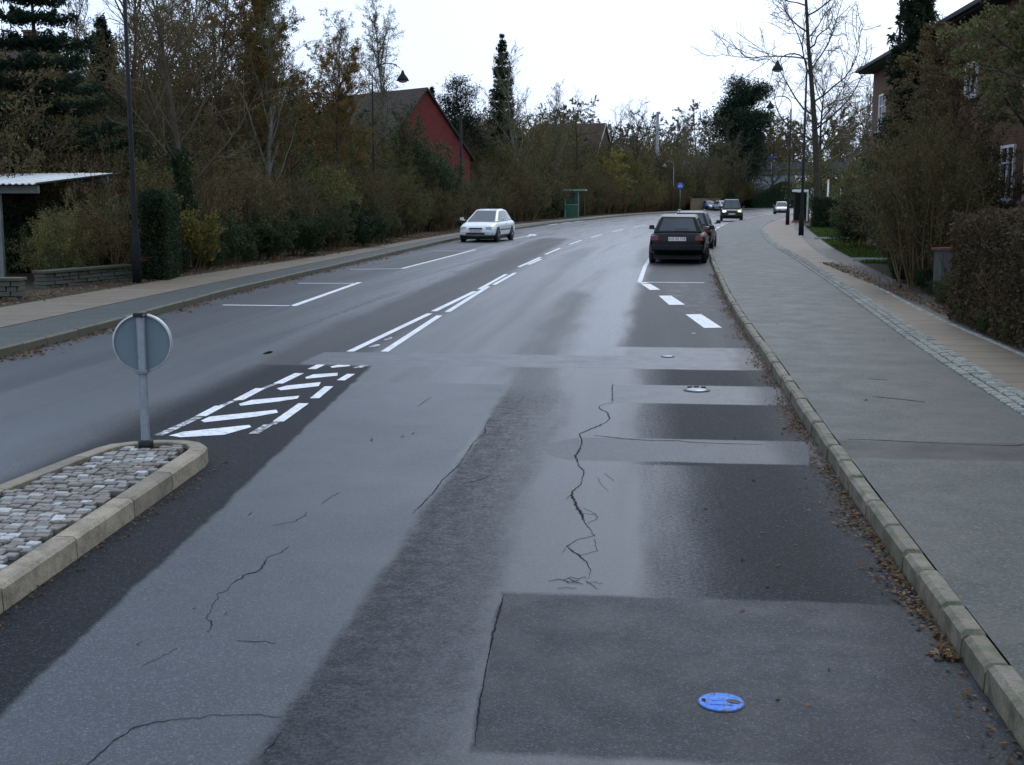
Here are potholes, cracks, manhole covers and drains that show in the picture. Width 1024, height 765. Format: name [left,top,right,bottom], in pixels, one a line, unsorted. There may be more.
crack [206,546,289,631]
manhole cover [697,693,746,713]
crack [550,384,613,589]
crack [87,714,273,765]
